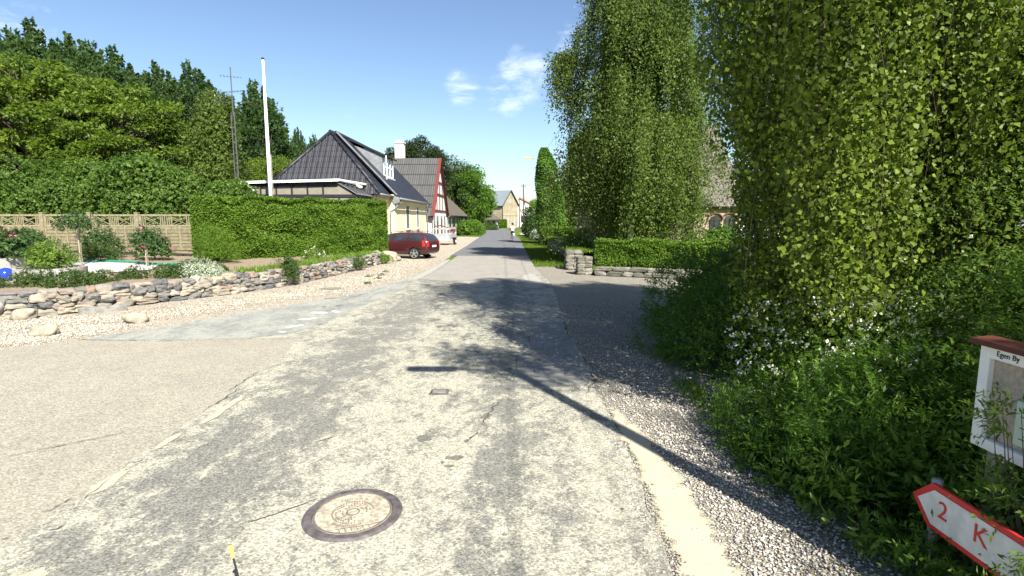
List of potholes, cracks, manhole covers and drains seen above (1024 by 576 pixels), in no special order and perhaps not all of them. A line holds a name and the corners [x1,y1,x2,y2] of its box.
crack [466,399,503,441]
manhole cover [301,489,402,542]
